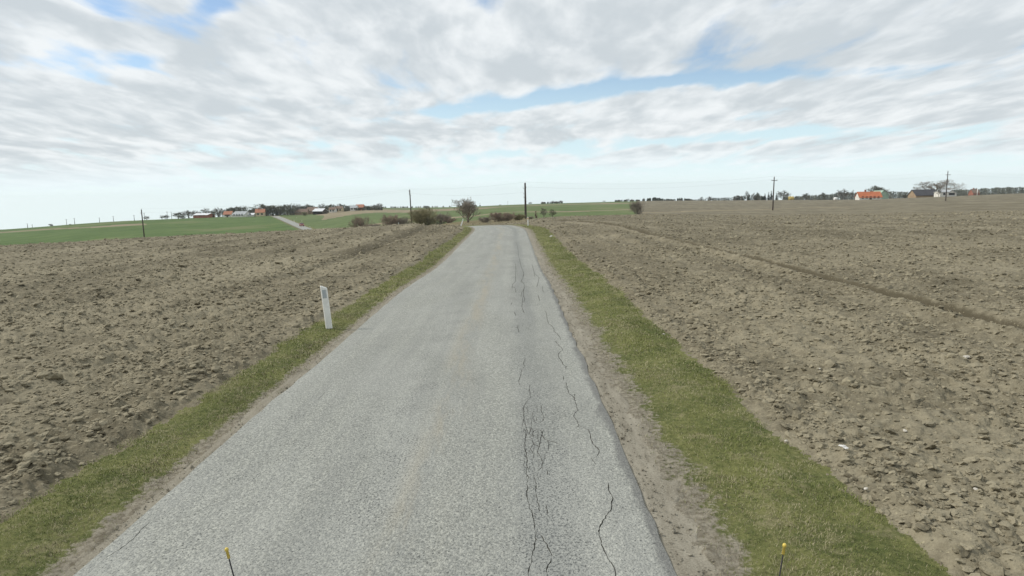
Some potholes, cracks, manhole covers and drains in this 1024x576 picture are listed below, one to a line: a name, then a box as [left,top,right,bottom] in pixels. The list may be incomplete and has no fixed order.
crack [511,255,599,465]
crack [519,359,559,576]
crack [598,483,616,576]
